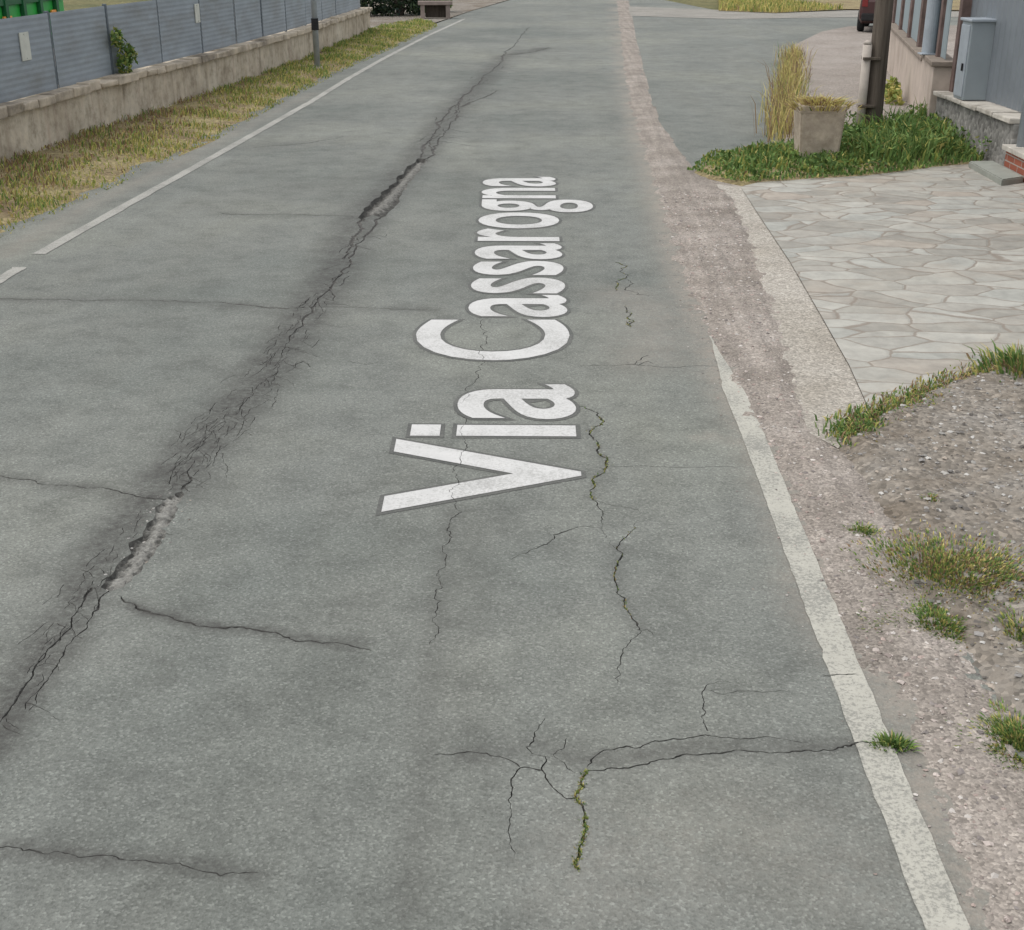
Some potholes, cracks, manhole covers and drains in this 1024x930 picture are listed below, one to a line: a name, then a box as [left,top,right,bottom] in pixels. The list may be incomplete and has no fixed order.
crack [0,846,259,876]
crack [0,28,549,734]
crack [588,355,718,368]
crack [428,681,917,866]
crack [615,262,649,326]
crack [512,408,730,683]
pothole [101,491,184,591]
